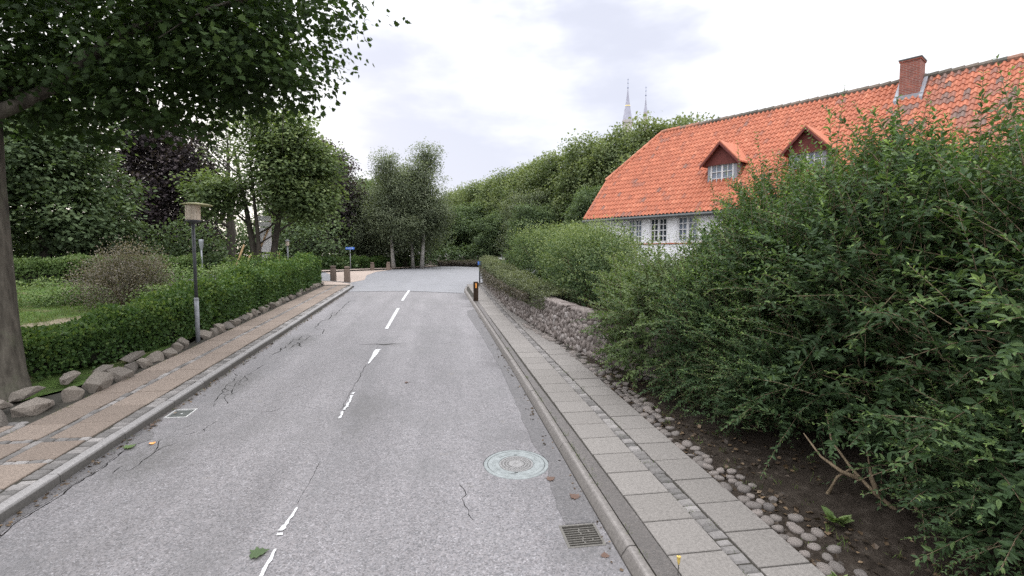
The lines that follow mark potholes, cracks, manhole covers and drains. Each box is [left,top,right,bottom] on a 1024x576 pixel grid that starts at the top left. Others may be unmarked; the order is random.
manhole cover [484,450,548,480]
drain grate [559,523,607,549]
crack [213,300,355,406]
